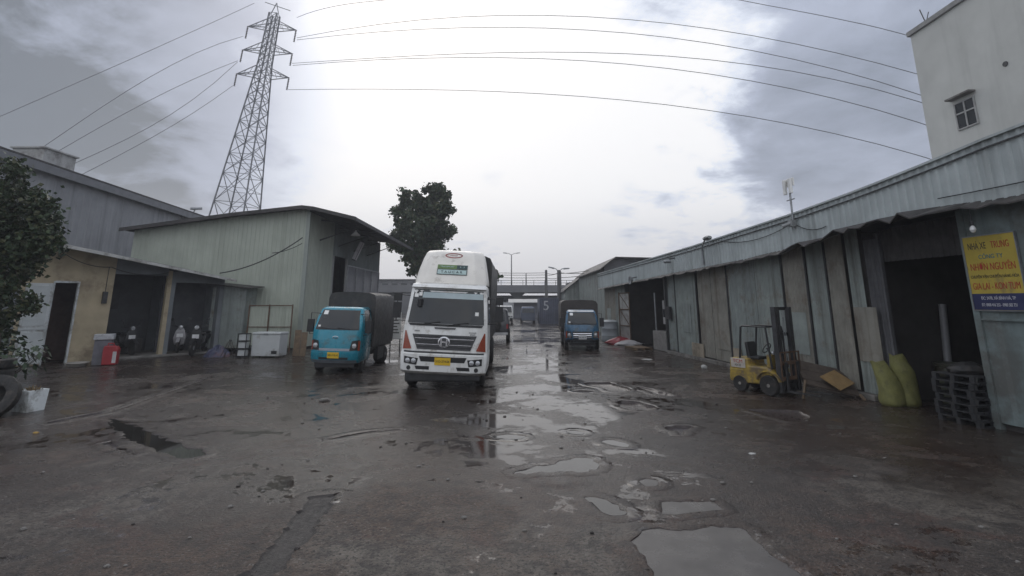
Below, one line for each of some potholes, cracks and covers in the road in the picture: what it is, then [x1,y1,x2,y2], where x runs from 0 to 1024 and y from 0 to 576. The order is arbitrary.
pothole [557,428,595,437]
pothole [740,407,821,424]
pothole [646,496,740,521]
pothole [500,454,613,479]
pothole [610,517,824,576]
pothole [655,423,705,437]
pothole [624,474,674,492]
pothole [96,416,219,462]
pothole [568,491,644,523]
